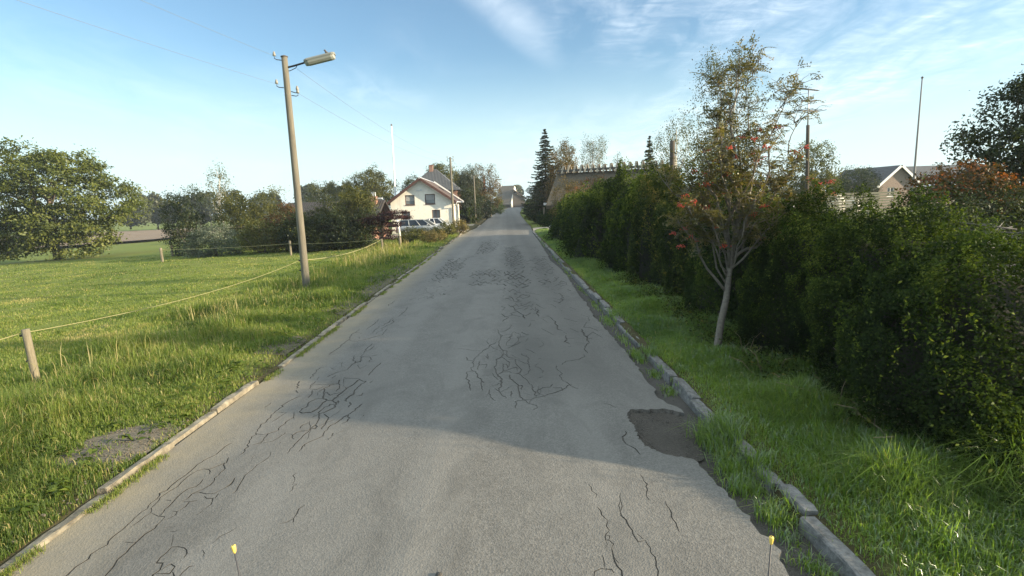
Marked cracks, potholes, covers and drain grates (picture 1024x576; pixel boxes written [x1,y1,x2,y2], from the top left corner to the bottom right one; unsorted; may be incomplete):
crack [589,477,679,576]
pothole [627,409,704,462]
crack [66,344,381,576]
crack [330,240,603,409]
